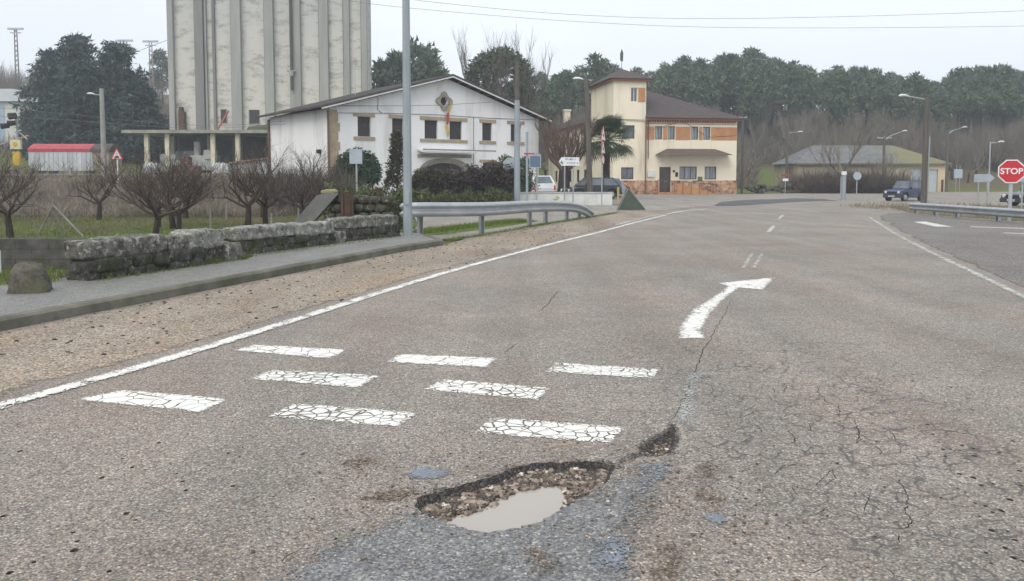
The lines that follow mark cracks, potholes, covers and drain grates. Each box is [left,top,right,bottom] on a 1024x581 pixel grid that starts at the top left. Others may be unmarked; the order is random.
pothole [643,426,676,456]
crack [773,388,896,493]
pothole [414,461,615,518]
crack [864,475,913,542]
